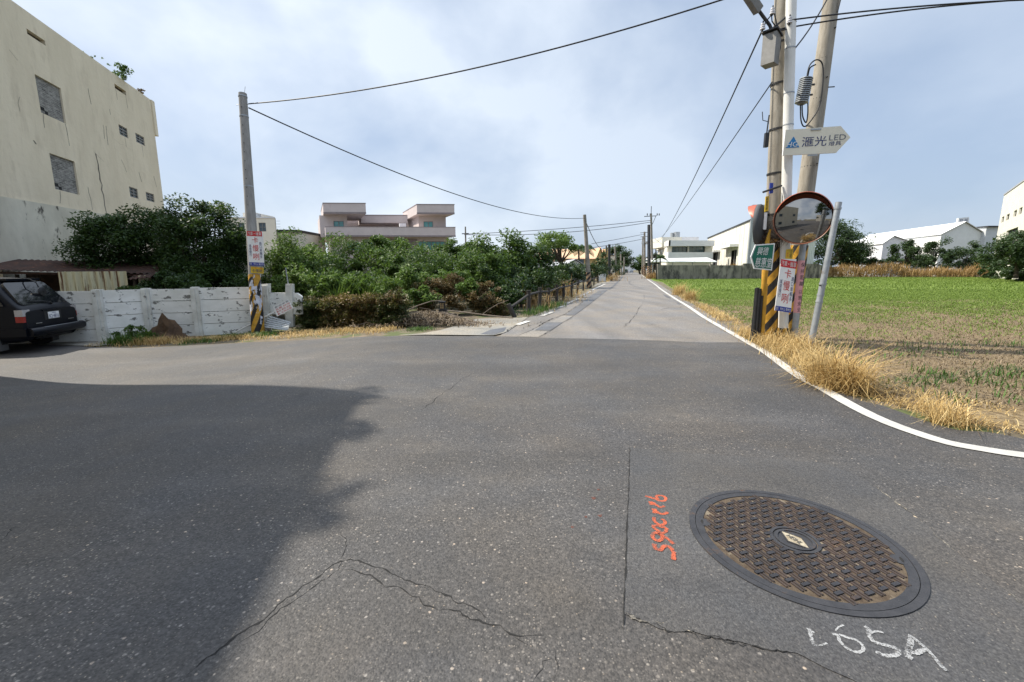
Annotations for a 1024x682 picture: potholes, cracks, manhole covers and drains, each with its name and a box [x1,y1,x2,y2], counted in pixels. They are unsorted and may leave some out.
manhole cover [689,490,930,618]
crack [188,535,532,674]
